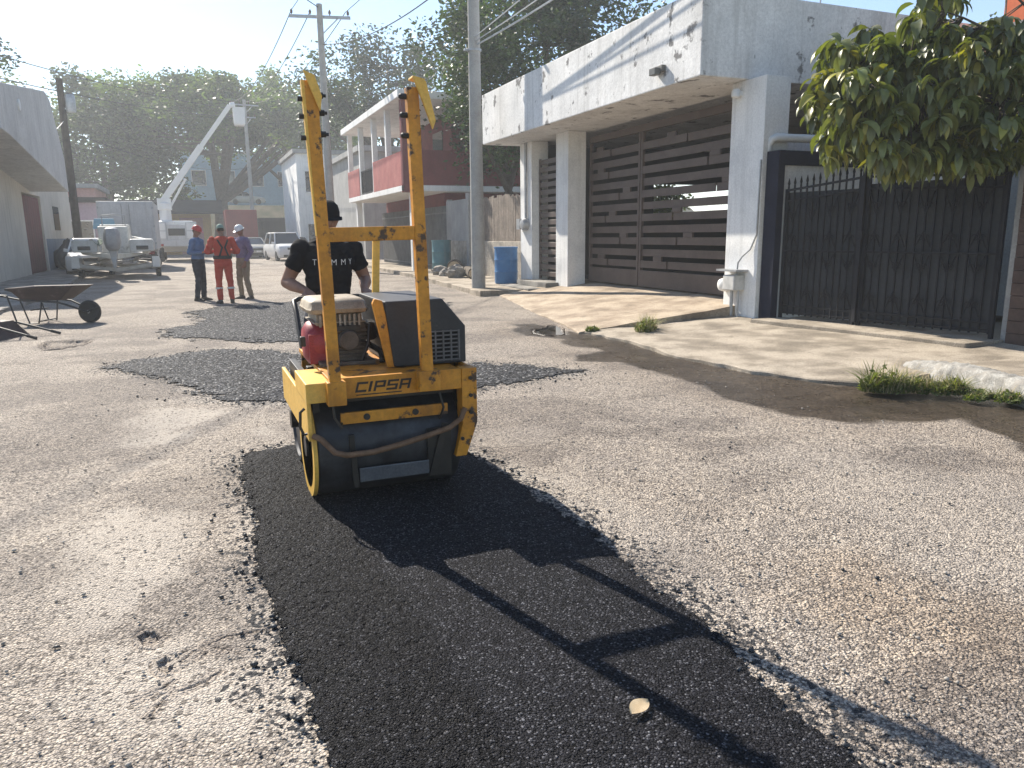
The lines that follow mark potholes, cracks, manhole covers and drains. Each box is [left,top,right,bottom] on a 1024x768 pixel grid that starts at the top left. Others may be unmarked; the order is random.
pothole [39,340,93,351]
pothole [131,629,169,652]
